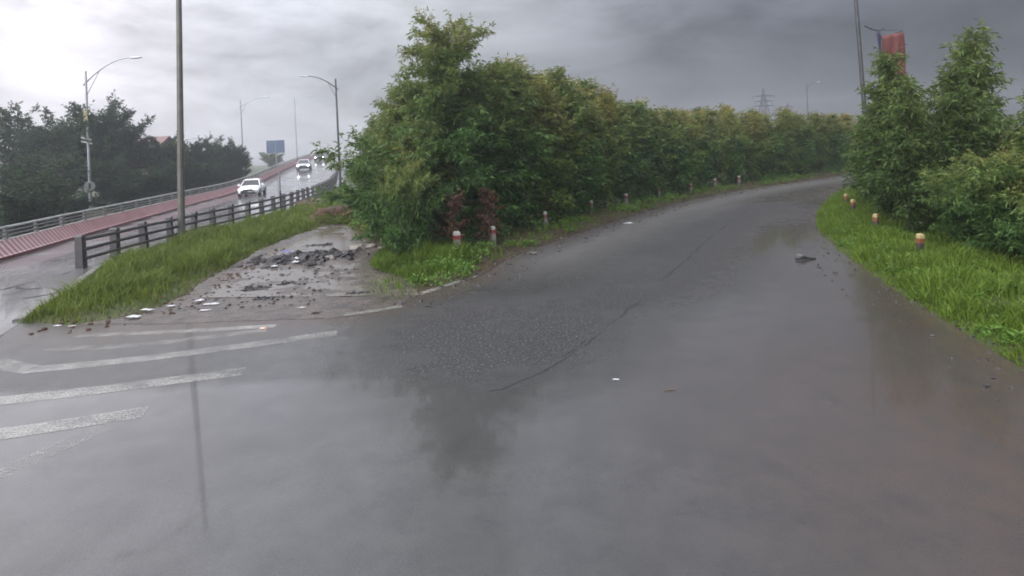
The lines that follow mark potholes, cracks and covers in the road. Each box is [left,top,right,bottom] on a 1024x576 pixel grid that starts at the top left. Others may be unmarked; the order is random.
crack [490,209,753,391]
